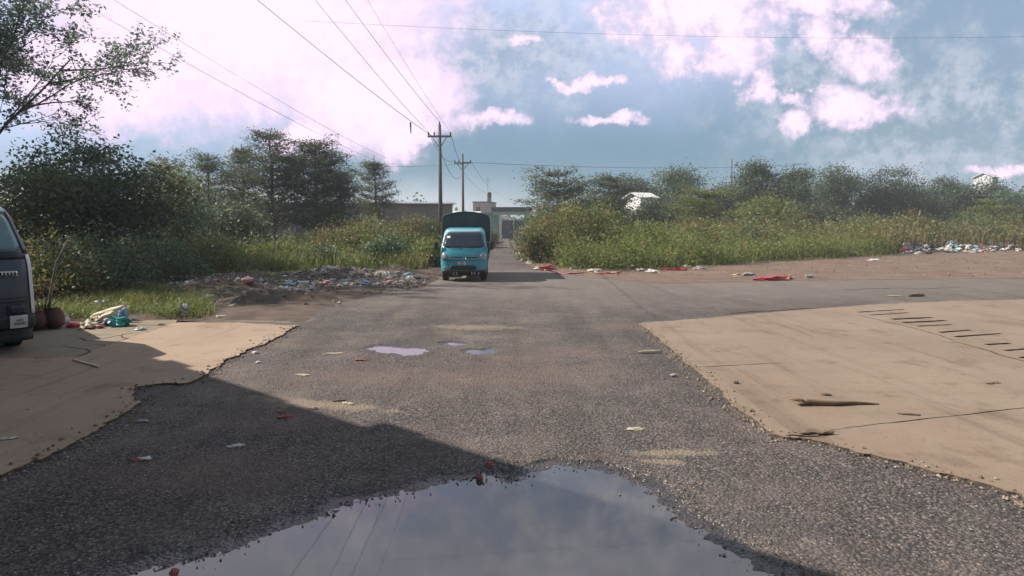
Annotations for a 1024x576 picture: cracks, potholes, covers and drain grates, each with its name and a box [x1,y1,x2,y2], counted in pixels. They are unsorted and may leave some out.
pothole [363,344,437,357]
pothole [76,457,802,576]
